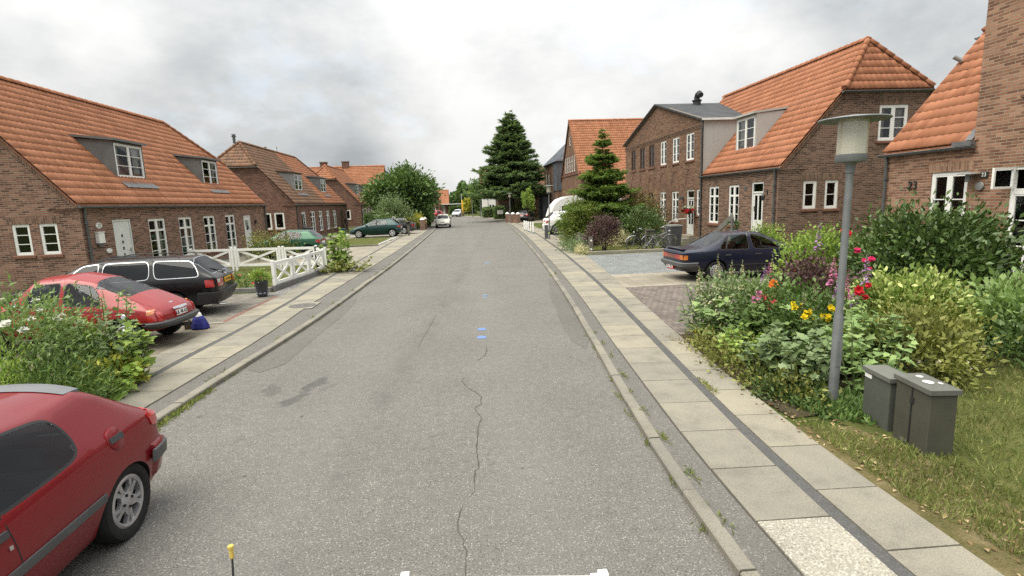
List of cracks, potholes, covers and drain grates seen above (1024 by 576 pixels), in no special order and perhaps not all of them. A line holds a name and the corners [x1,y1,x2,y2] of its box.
crack [457,378,482,576]
